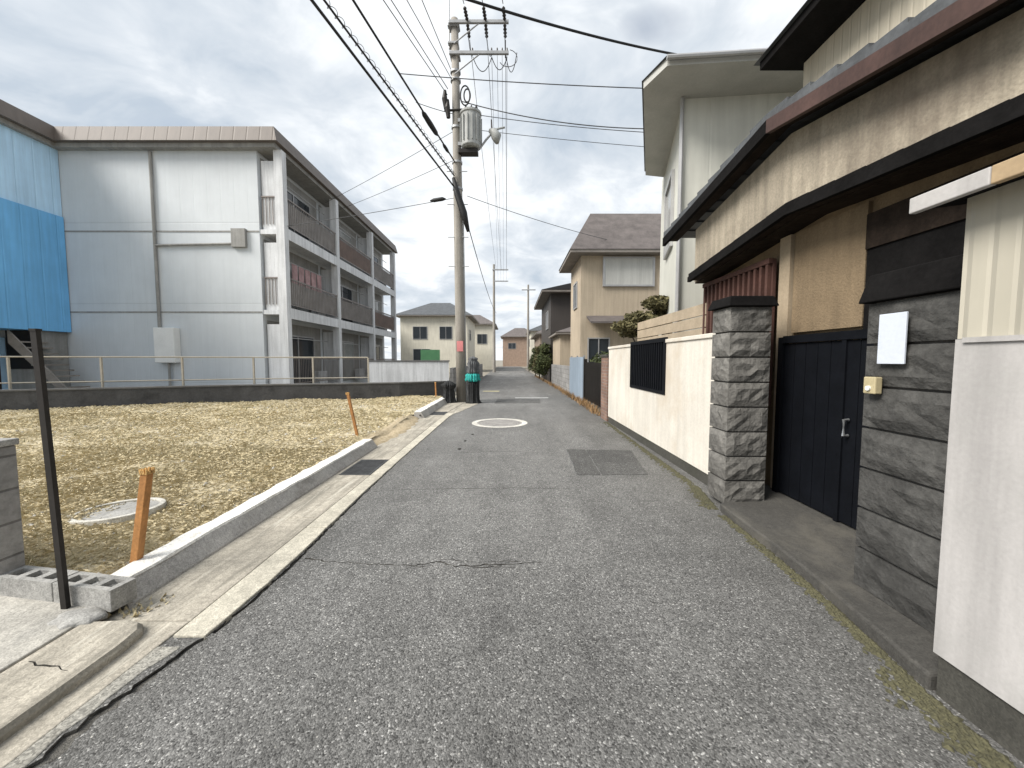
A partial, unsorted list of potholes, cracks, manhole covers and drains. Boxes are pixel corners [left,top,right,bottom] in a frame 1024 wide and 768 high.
crack [26,464,556,768]
drain grate [339,459,389,475]
